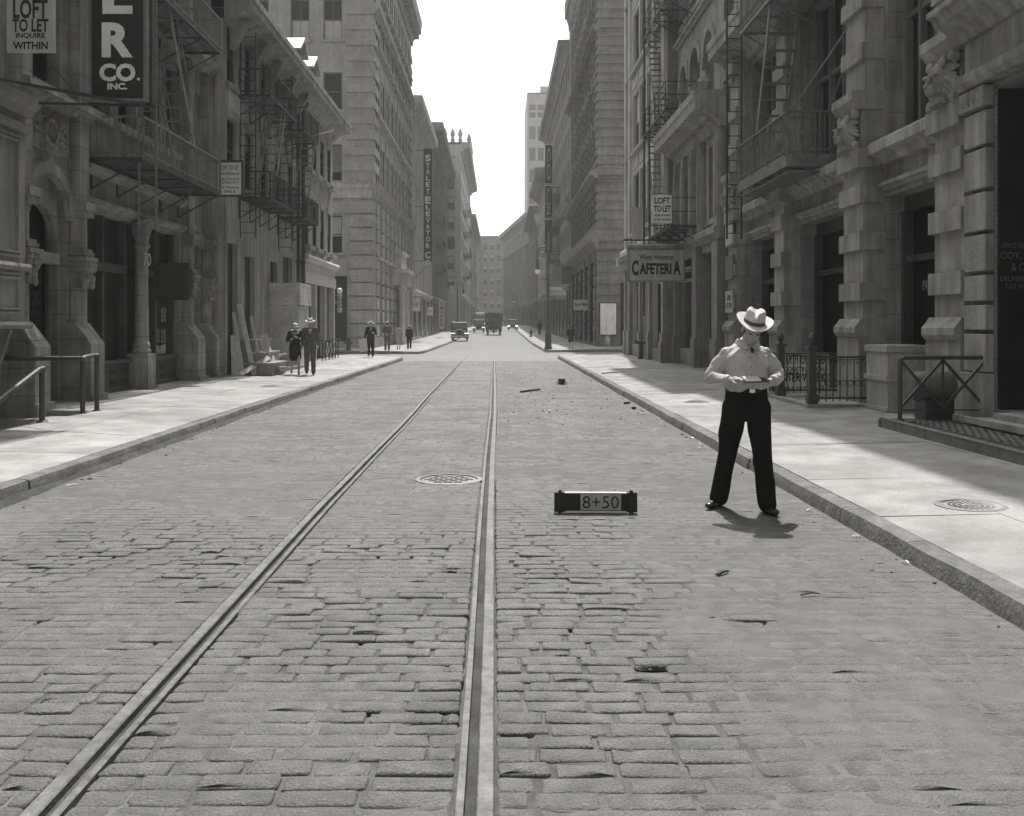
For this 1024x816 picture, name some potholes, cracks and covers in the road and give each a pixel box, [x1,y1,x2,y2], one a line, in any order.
manhole cover [933,499,1009,512]
manhole cover [415,474,482,485]
